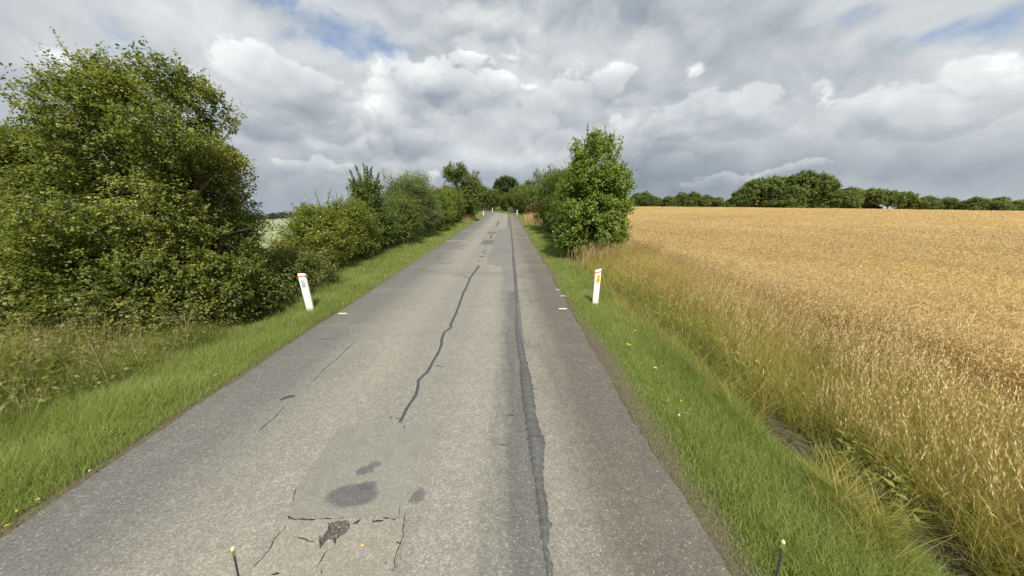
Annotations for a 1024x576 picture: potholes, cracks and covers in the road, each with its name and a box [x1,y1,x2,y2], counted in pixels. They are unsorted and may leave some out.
crack [255,489,327,575]
pothole [319,520,350,549]
crack [259,339,355,431]
